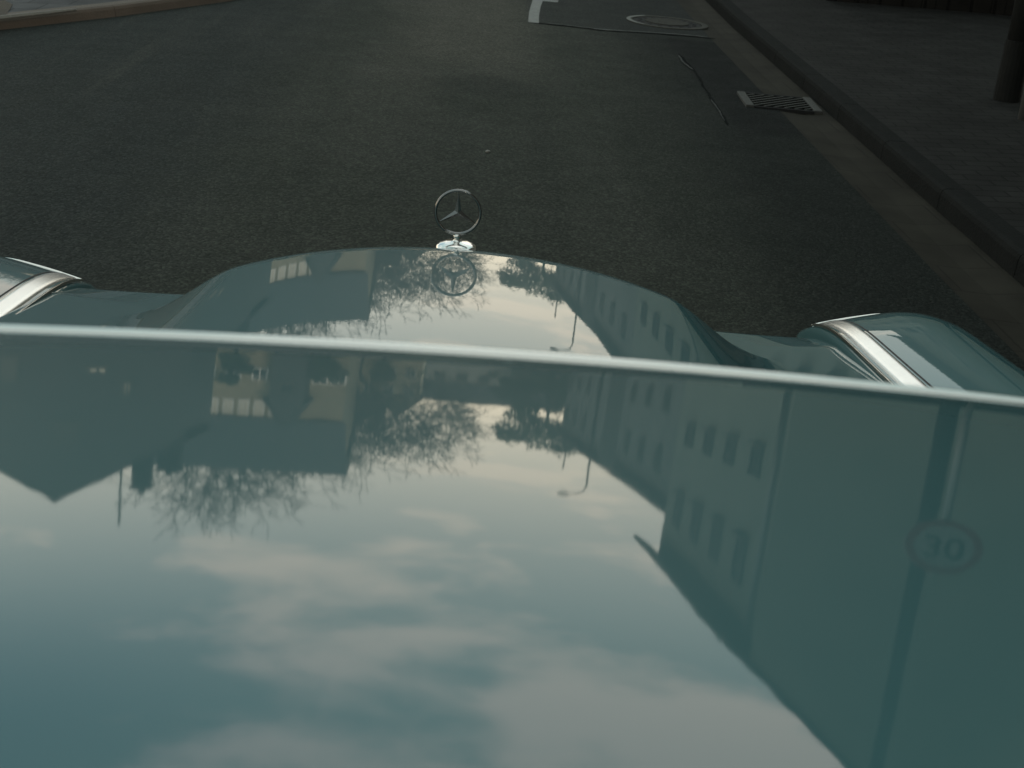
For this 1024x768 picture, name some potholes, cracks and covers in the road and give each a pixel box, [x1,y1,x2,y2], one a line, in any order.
crack [679,54,729,125]
drain grate [737,91,823,115]
manhole cover [626,15,708,30]
